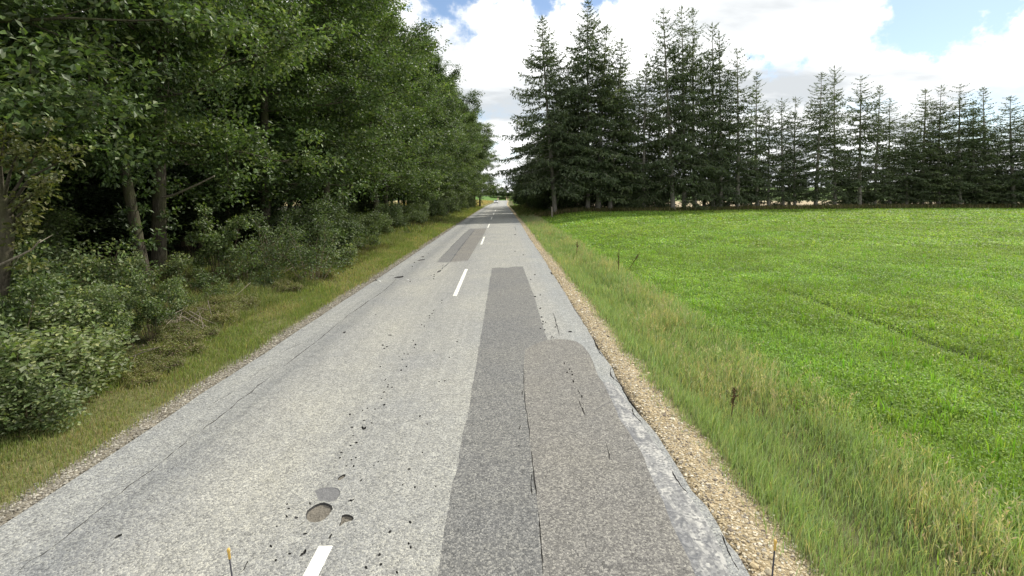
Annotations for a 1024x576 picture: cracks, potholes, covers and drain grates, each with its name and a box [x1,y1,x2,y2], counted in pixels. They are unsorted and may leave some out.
pothole [306,502,333,522]
